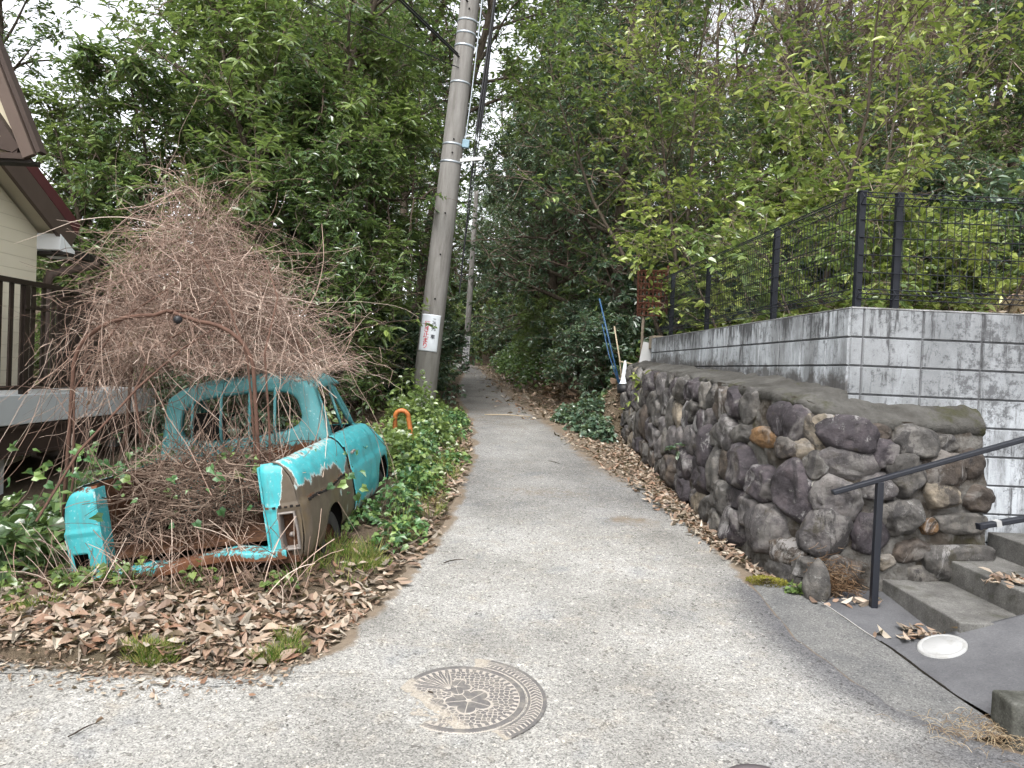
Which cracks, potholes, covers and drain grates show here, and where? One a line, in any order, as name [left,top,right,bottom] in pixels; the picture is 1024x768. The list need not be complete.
manhole cover [400,659,547,740]
